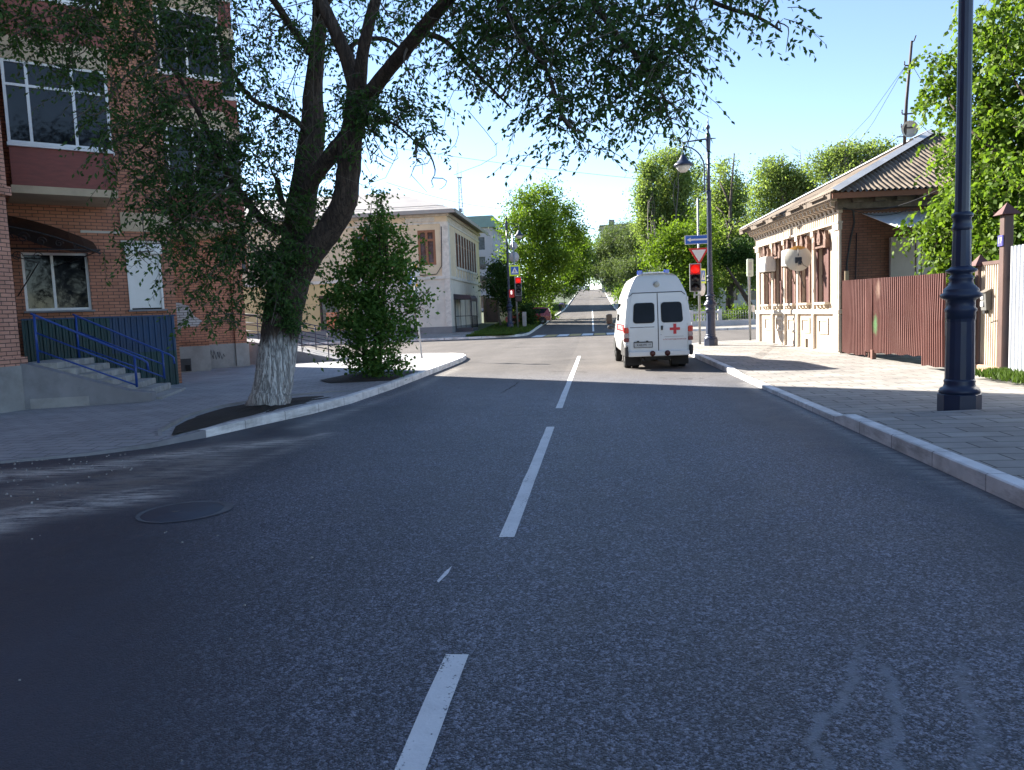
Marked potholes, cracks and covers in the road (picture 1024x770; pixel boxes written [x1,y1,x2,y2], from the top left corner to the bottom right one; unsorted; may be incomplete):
manhole cover [135,501,234,523]
